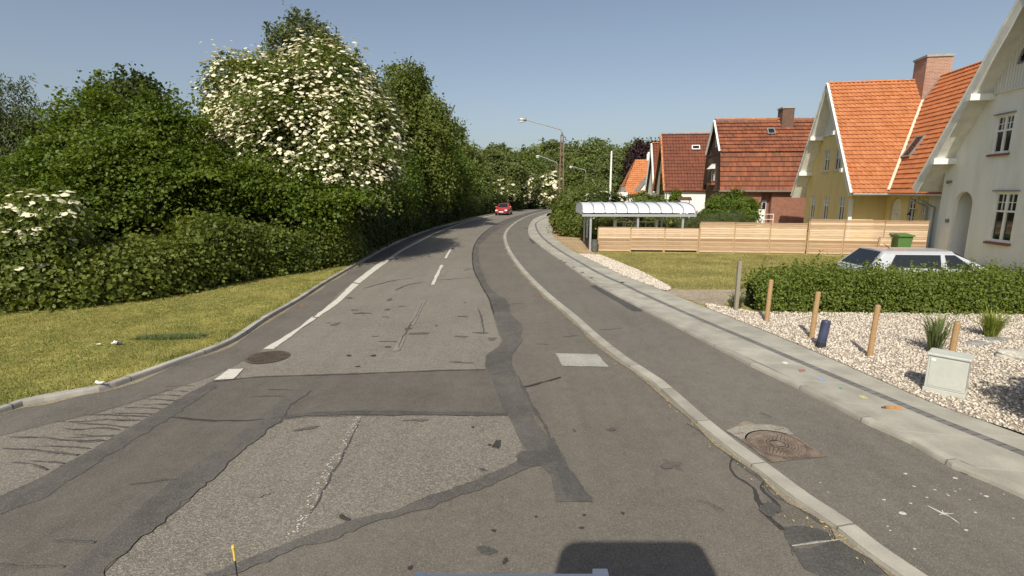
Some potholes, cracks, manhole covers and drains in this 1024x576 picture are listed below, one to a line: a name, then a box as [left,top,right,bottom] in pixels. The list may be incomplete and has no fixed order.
manhole cover [244,351,290,364]
crack [310,419,361,521]
crack [54,385,182,442]
manhole cover [734,428,826,462]
